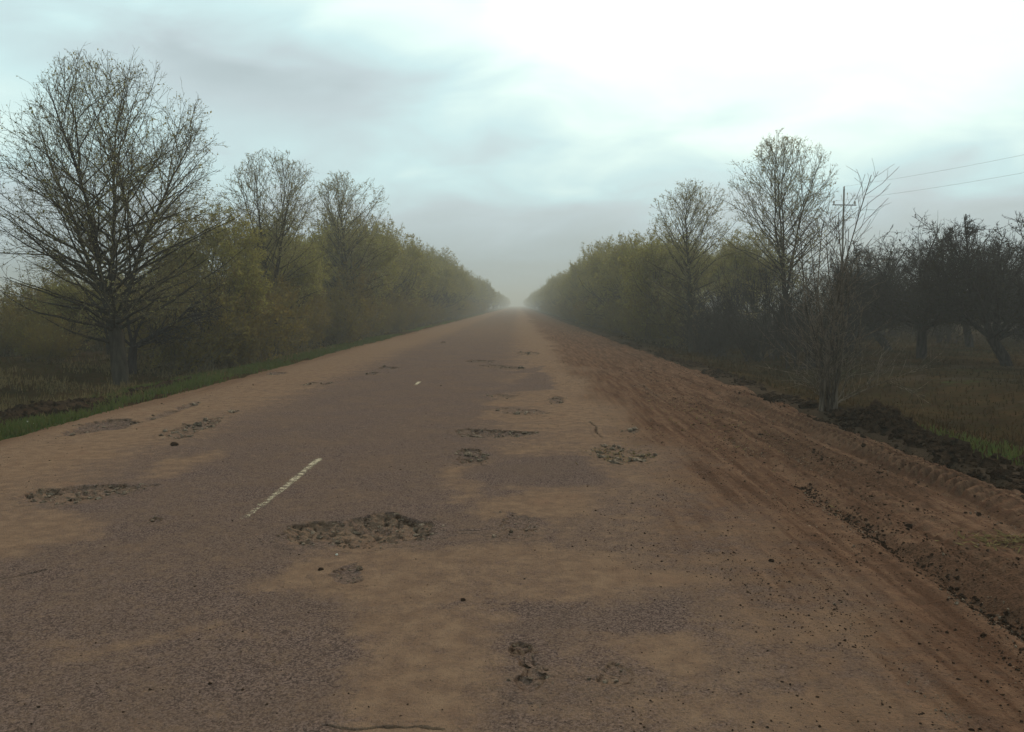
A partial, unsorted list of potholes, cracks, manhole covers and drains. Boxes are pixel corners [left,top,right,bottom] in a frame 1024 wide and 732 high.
crack [303,718,464,732]
pothole [540,395,571,405]
pothole [444,447,498,466]
pothole [153,416,232,442]
pothole [305,559,382,591]
pothole [581,443,666,468]
pothole [446,427,549,440]
pothole [44,418,149,439]
pothole [255,510,461,553]
